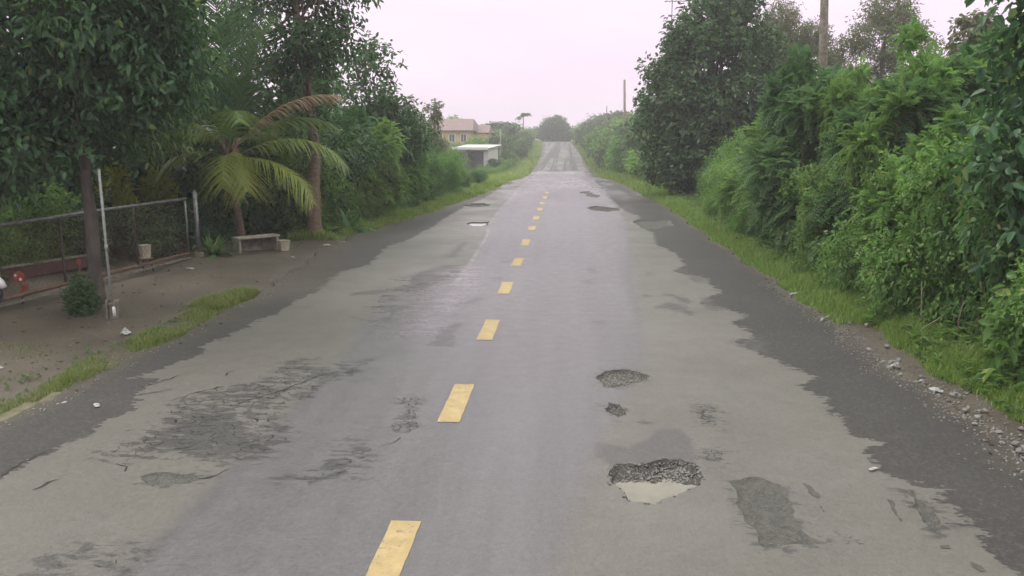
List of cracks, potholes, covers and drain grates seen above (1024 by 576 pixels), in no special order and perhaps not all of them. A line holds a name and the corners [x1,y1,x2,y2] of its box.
pothole [595,368,650,388]
crack [101,359,362,479]
pothole [605,402,627,418]
pothole [607,457,705,504]
crack [304,397,419,480]
